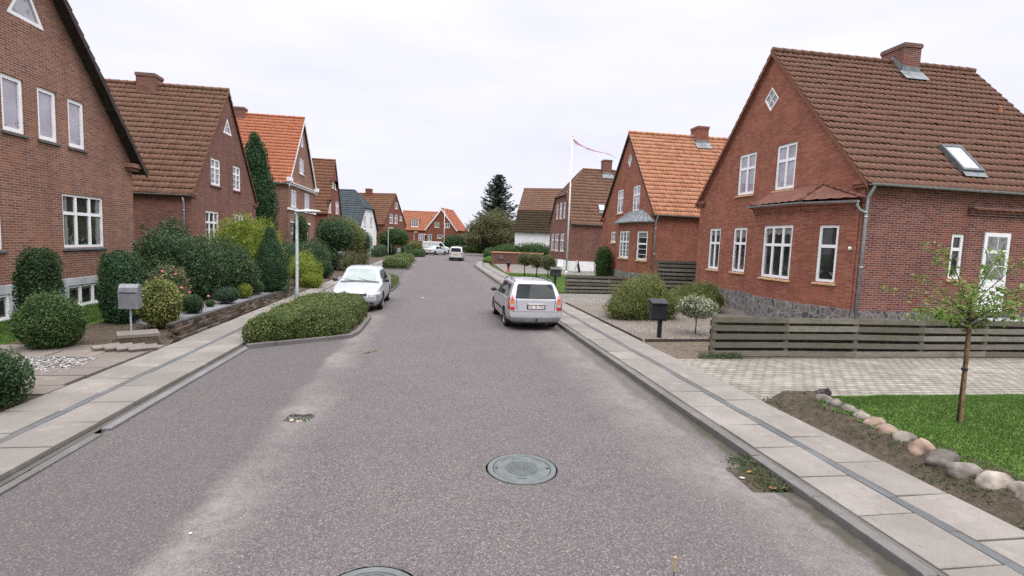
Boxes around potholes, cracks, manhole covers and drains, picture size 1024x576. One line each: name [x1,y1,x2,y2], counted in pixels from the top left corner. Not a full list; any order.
manhole cover [341,567,410,576]
pothole [283,414,314,422]
manhole cover [487,454,558,485]
